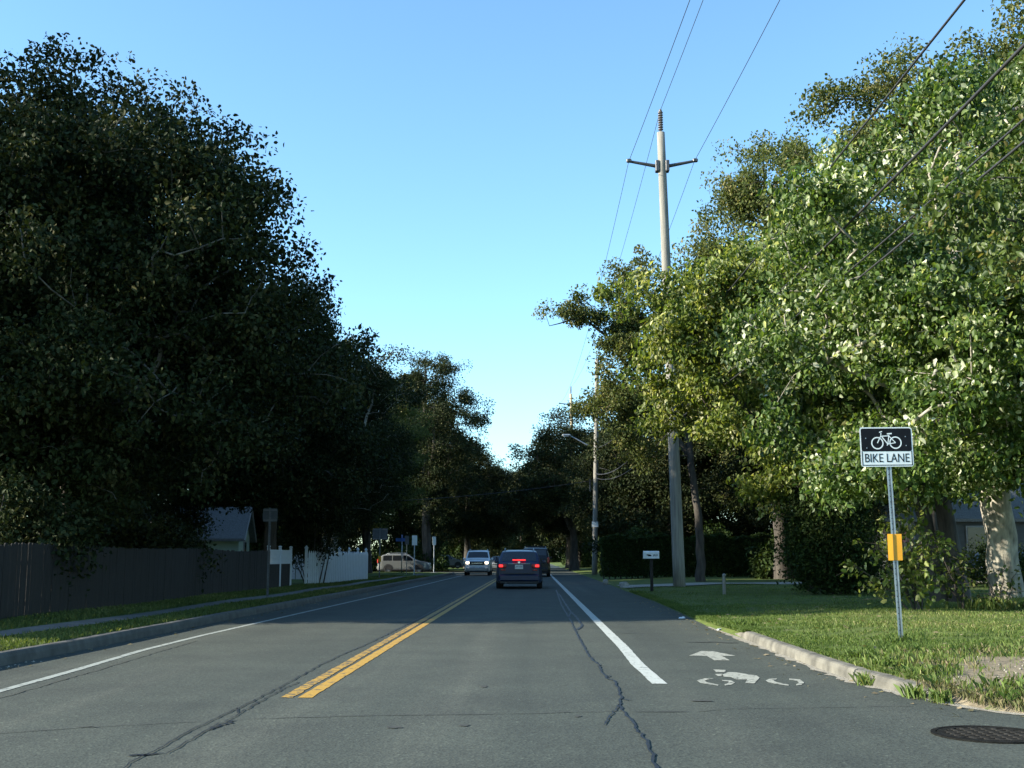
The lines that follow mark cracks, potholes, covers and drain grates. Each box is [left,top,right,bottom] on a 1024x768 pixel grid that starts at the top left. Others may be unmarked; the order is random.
crack [0,593,578,768]
manhole cover [930,725,1024,744]
